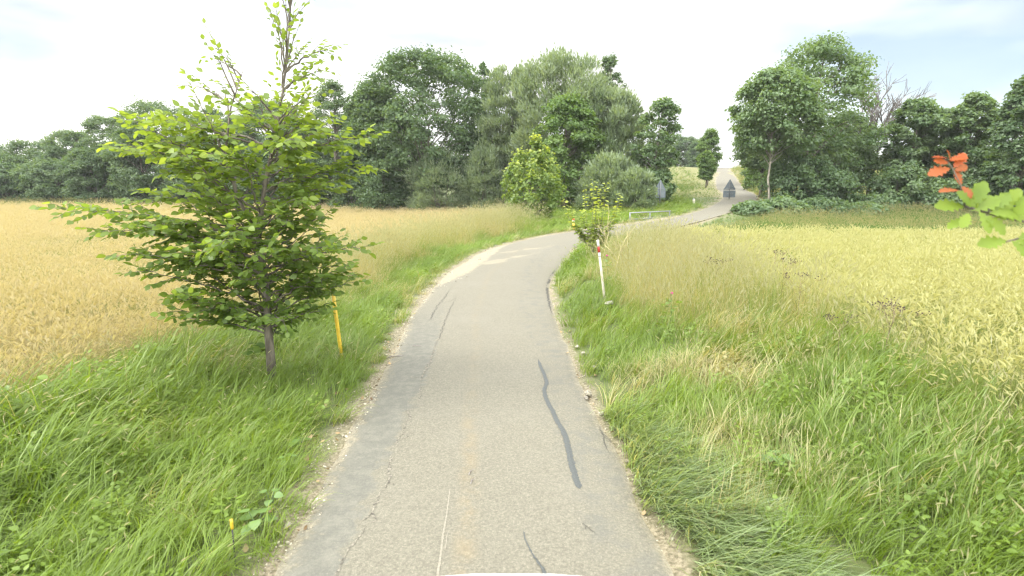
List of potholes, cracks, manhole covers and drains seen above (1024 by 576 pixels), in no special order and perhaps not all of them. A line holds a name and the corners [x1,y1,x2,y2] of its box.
crack [335,291,456,576]
